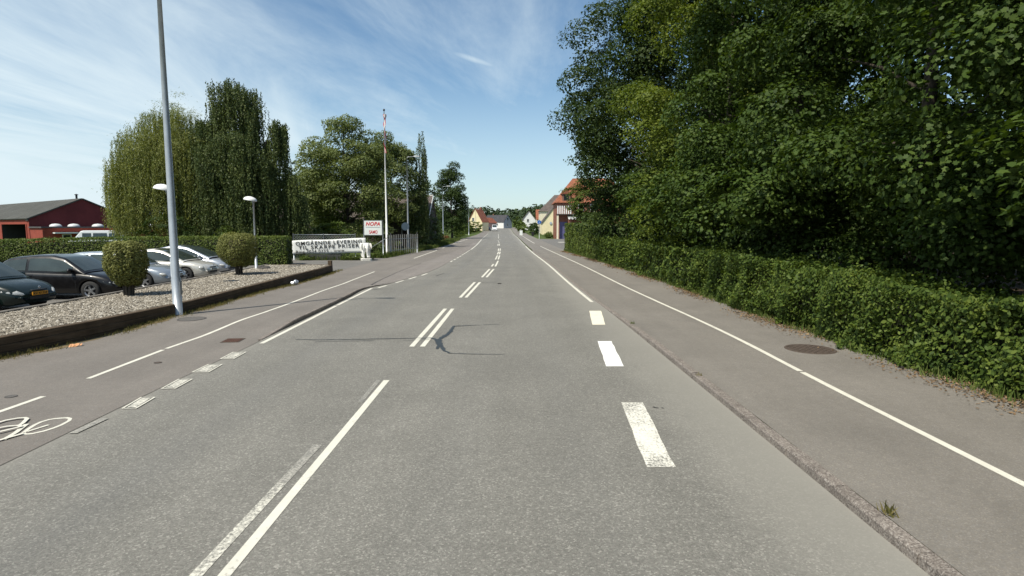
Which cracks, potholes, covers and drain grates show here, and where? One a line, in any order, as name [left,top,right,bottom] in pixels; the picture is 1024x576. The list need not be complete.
manhole cover [784,344,837,354]
